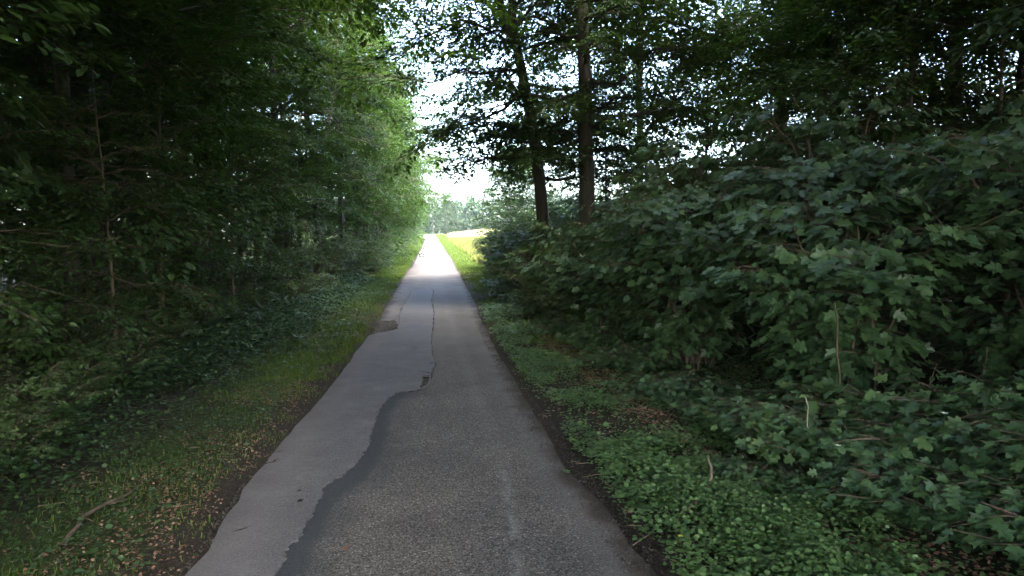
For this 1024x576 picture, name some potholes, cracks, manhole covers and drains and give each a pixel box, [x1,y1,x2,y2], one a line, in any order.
pothole [369,320,398,335]
crack [406,301,436,393]
